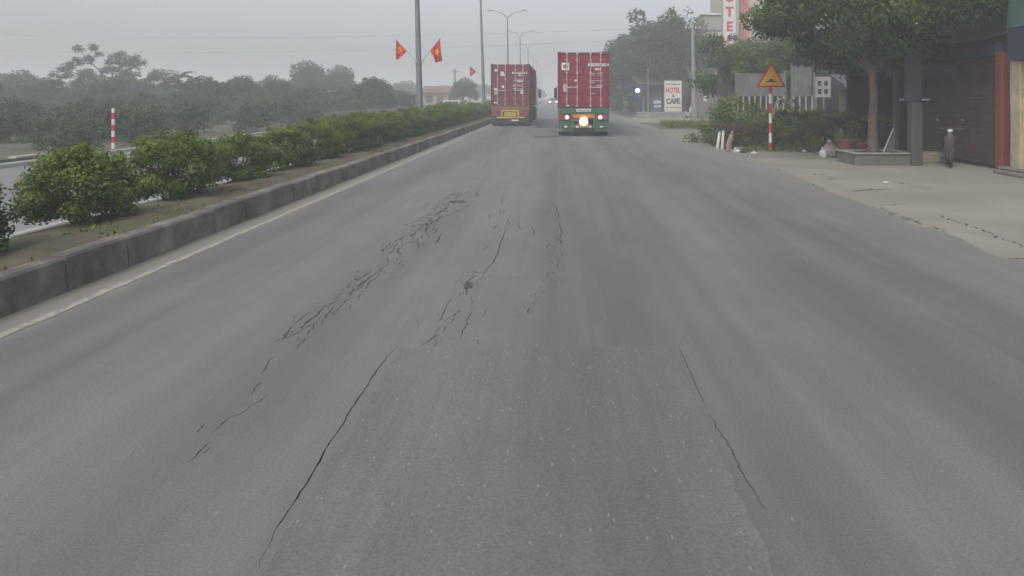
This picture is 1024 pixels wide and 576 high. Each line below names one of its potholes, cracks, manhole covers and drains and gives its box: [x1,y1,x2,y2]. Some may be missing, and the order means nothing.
crack [279,191,478,350]
crack [187,346,401,569]
crack [418,198,564,345]
